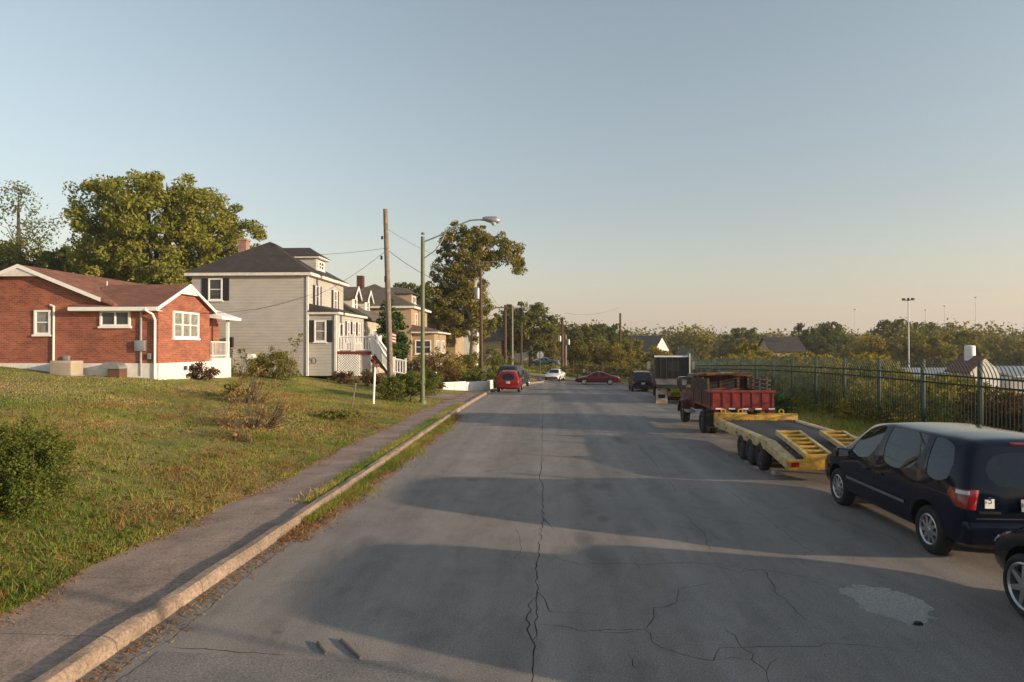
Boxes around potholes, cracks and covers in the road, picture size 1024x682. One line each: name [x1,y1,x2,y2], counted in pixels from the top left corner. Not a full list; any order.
crack [513,404,894,682]
crack [174,647,280,655]
